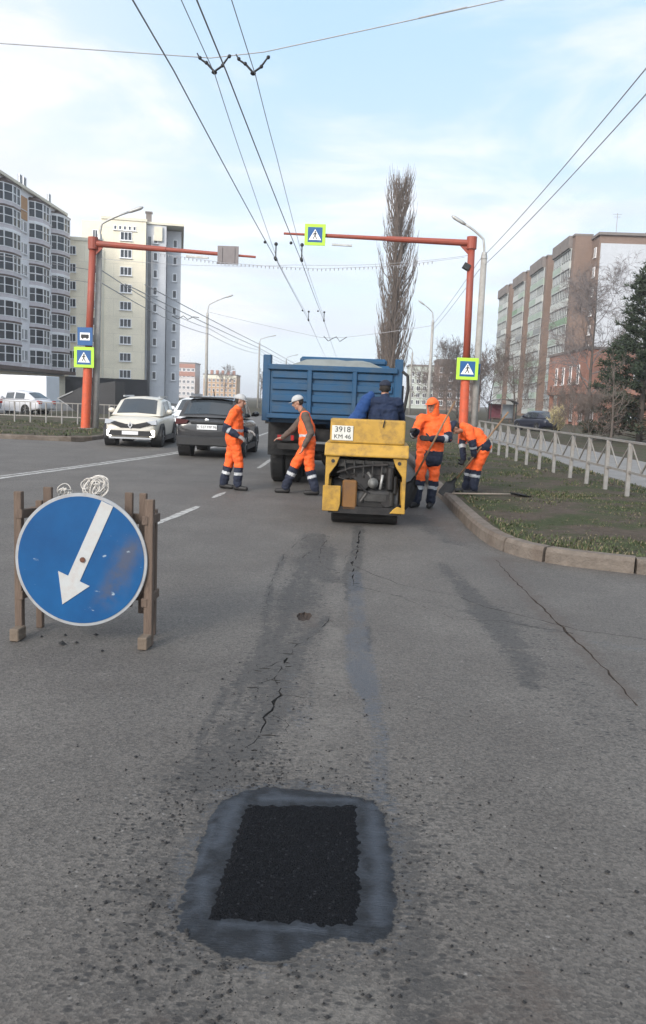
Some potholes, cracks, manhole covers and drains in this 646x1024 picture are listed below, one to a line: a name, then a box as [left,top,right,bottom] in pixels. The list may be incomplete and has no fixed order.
pothole [297,612,312,621]
crack [264,531,646,640]
crack [245,620,329,751]
